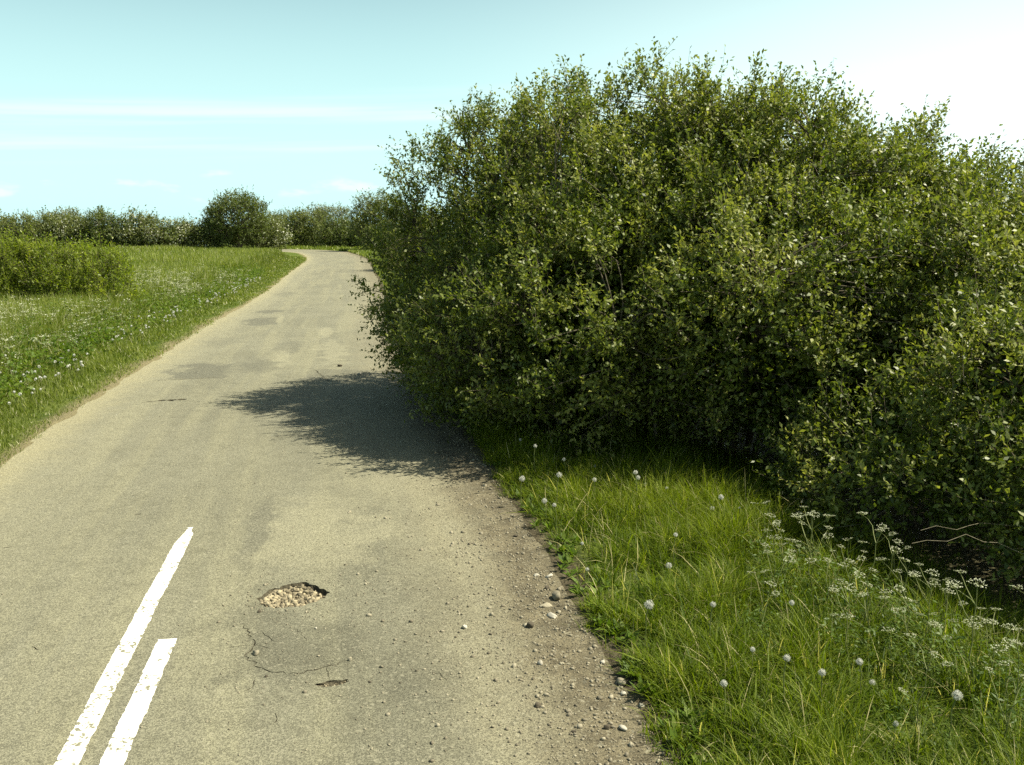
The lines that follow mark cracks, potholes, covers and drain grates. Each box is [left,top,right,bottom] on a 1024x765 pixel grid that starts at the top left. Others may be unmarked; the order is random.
crack [228,622,354,691]
pothole [315,679,348,687]
pothole [257,582,330,608]
